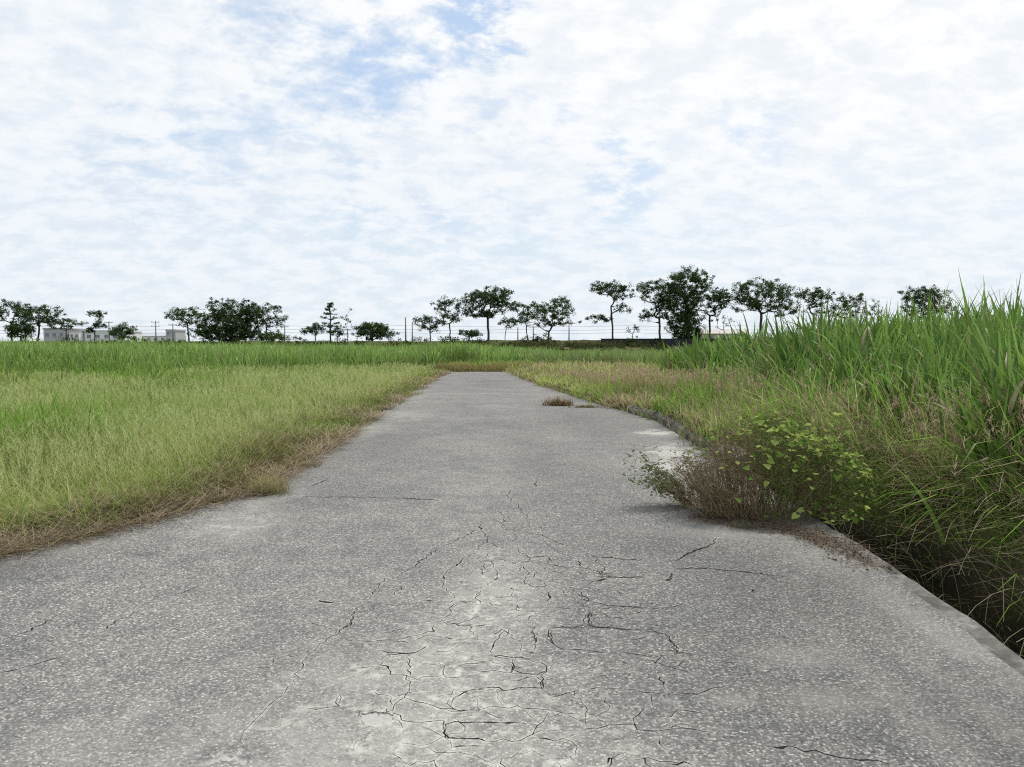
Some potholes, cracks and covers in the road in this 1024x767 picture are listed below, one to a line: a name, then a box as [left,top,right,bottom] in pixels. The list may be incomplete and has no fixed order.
crack [305,480,433,500]
crack [769,746,888,764]
crack [230,491,761,767]
crack [665,538,783,593]
